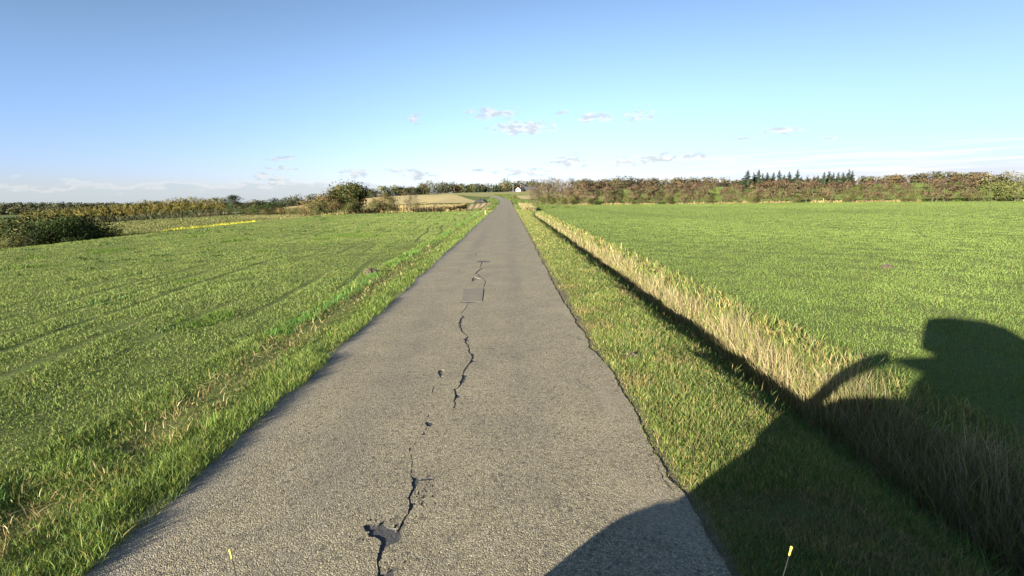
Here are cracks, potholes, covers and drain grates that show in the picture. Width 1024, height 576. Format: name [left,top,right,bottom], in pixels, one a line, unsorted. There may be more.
crack [348,414,438,576]
